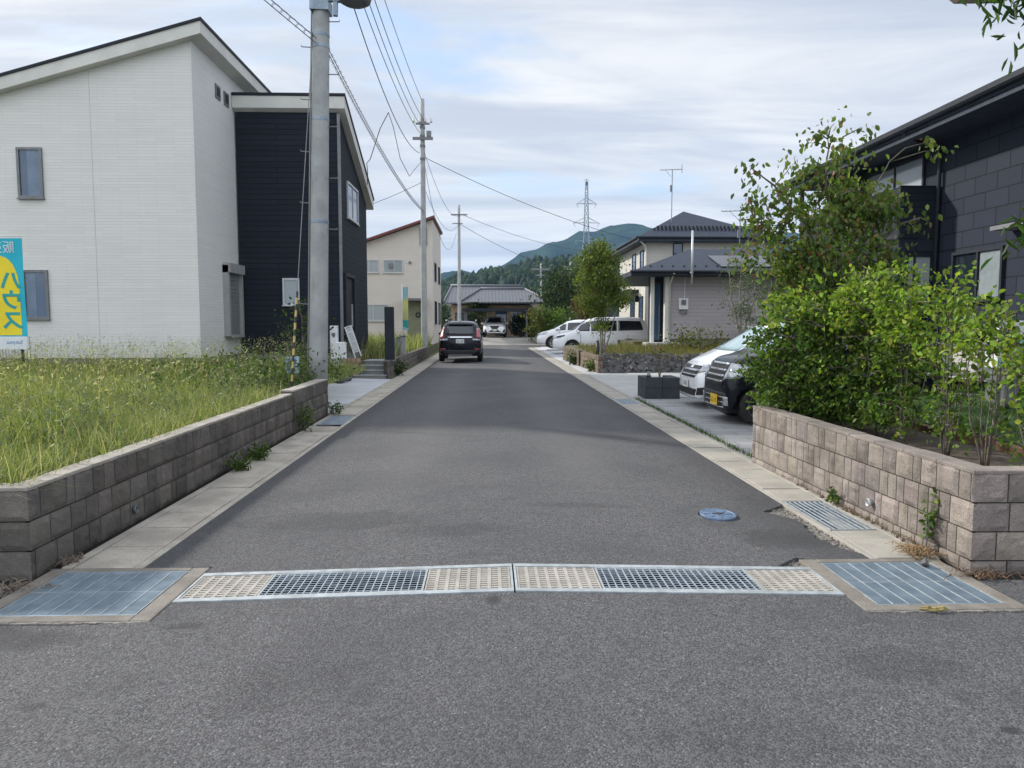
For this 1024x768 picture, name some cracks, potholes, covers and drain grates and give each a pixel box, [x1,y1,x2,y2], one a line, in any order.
drain grate [594,567,765,590]
drain grate [317,416,354,425]
drain grate [783,501,876,531]
drain grate [257,569,428,596]
manhole cover [696,508,740,521]
